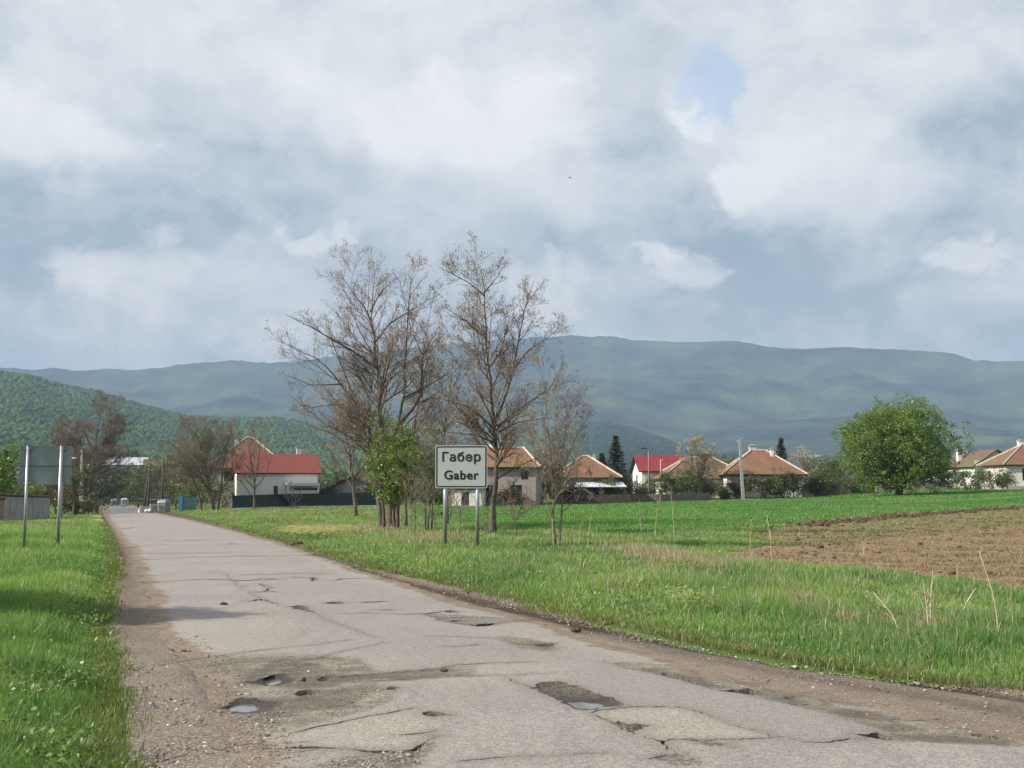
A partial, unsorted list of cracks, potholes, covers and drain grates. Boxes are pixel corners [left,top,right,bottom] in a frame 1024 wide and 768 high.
crack [591,700,959,759]
crack [121,546,381,666]
pothole [531,681,625,710]
pothole [216,697,283,714]
crack [217,708,436,763]
pothole [243,673,297,686]
